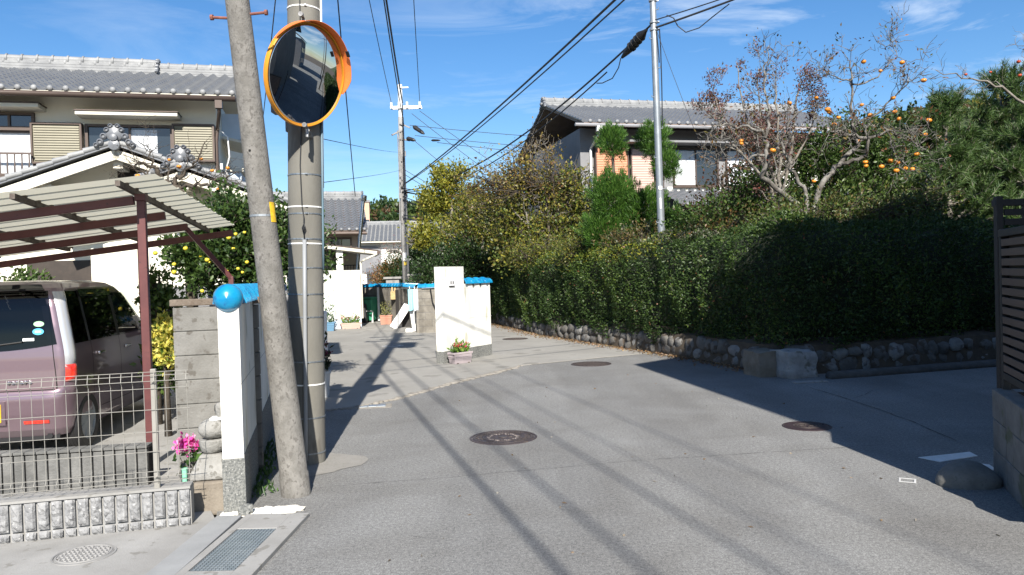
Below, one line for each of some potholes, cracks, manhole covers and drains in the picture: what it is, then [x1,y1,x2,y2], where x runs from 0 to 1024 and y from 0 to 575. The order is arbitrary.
manhole cover [782,421,832,431]
manhole cover [469,430,537,445]
drain grate [175,513,309,575]
manhole cover [50,544,117,566]
